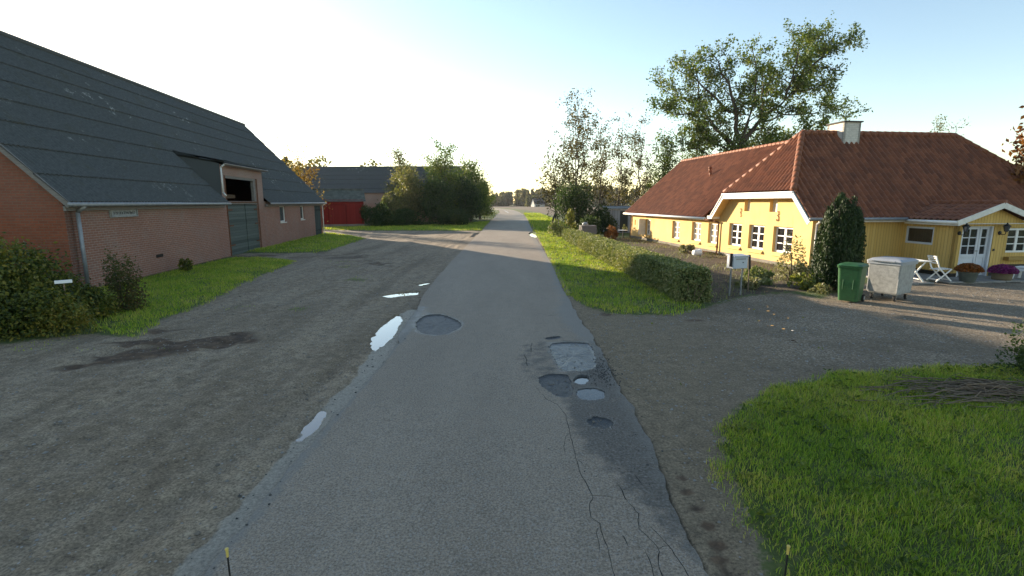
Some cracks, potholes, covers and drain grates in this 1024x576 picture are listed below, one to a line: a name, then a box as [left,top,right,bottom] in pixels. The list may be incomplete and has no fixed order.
pothole [538,374,574,397]
pothole [416,314,461,335]
pothole [587,416,613,429]
pothole [573,374,590,384]
pothole [576,388,605,400]
crack [534,385,689,576]
